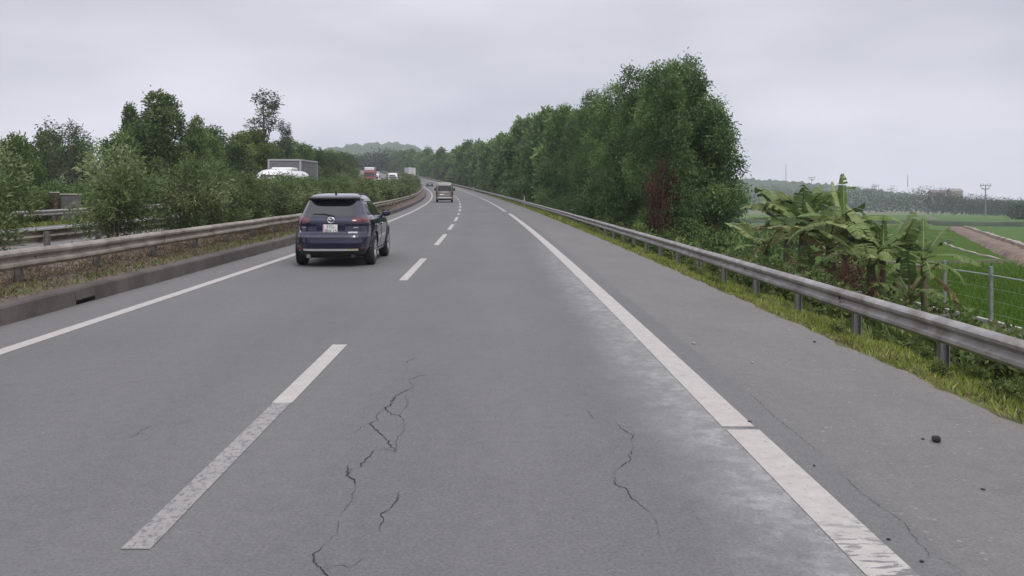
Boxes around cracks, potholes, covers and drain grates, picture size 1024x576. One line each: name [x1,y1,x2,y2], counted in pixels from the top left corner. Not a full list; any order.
crack [312,376,418,576]
crack [614,424,660,541]
